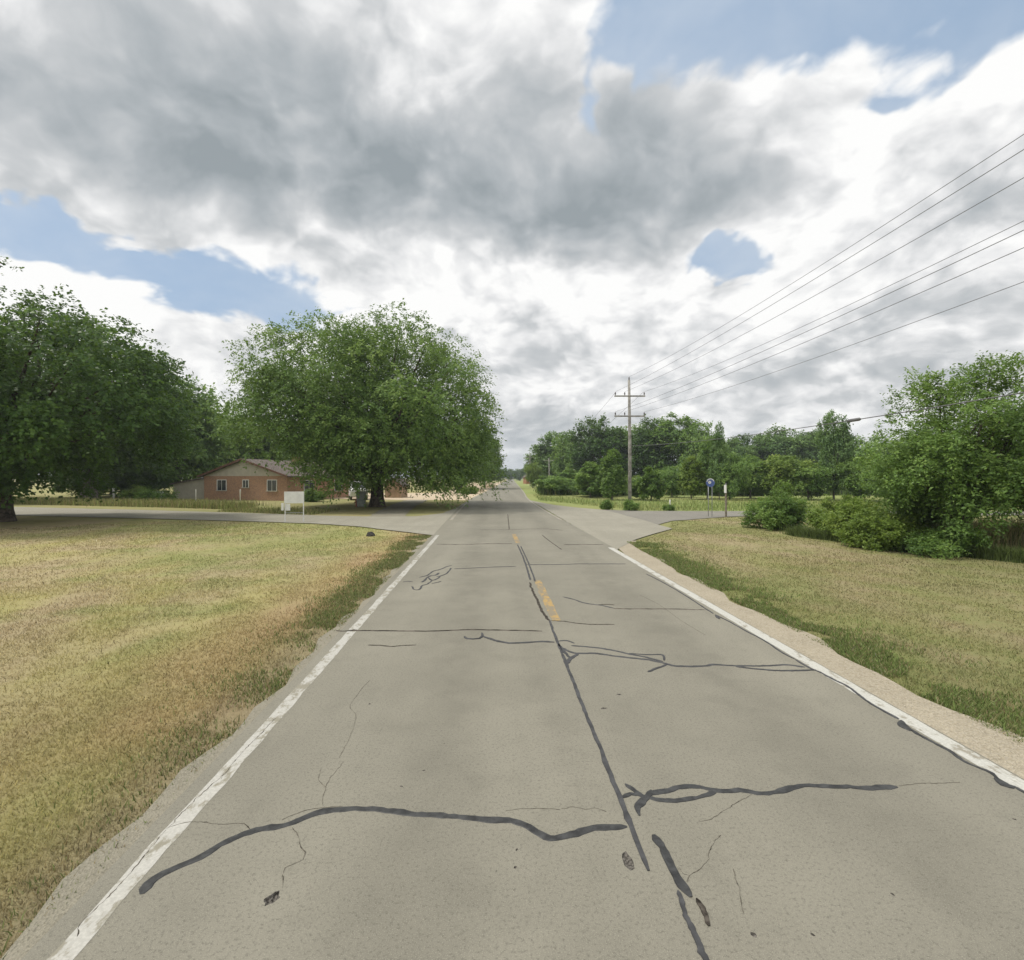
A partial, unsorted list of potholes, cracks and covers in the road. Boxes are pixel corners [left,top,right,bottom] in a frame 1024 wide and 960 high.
pothole [622,851,635,870]
pothole [264,890,280,906]
